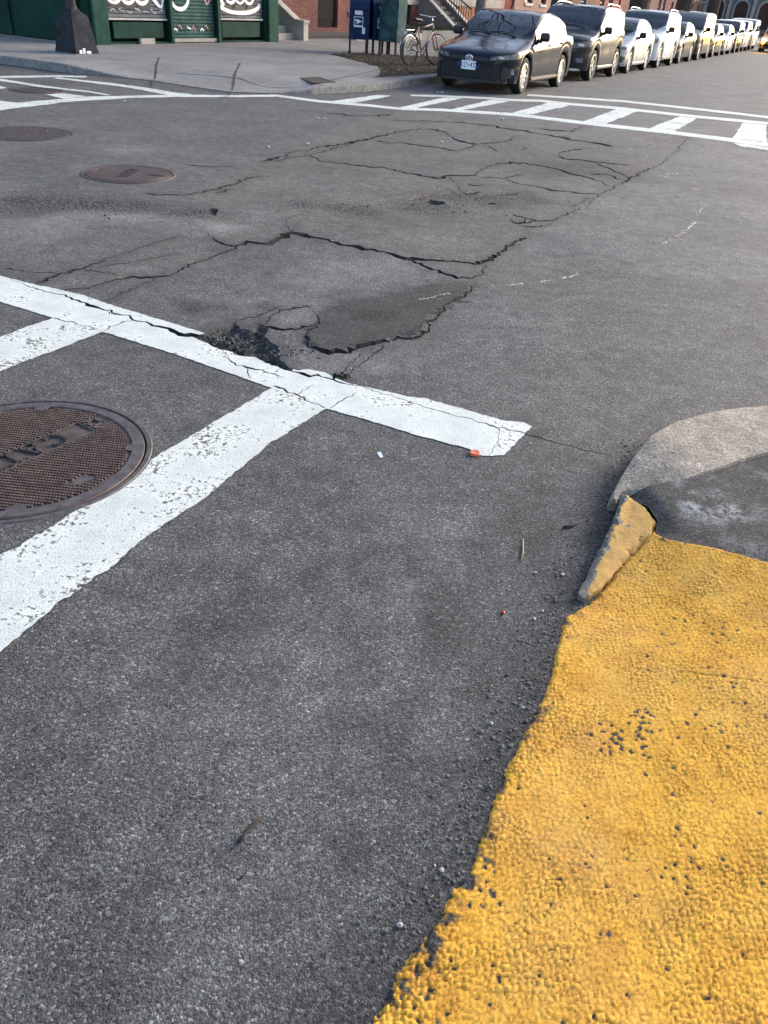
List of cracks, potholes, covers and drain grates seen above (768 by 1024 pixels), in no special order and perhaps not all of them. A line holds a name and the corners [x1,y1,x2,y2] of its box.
pothole [195,322,293,372]
crack [7,113,630,456]
manhole cover [0,399,153,525]
manhole cover [0,126,74,141]
manhole cover [80,165,176,184]
